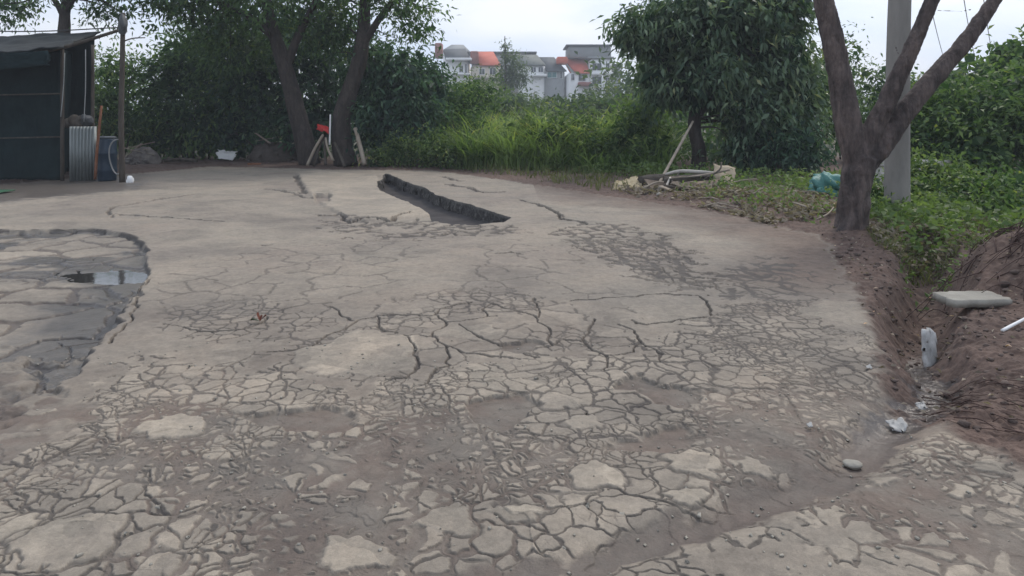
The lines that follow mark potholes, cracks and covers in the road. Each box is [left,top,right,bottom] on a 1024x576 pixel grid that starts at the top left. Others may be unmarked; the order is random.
pothole [465,394,540,433]
pothole [377,174,511,226]
pothole [636,384,717,409]
crack [0,174,1024,576]
pothole [614,372,659,391]
